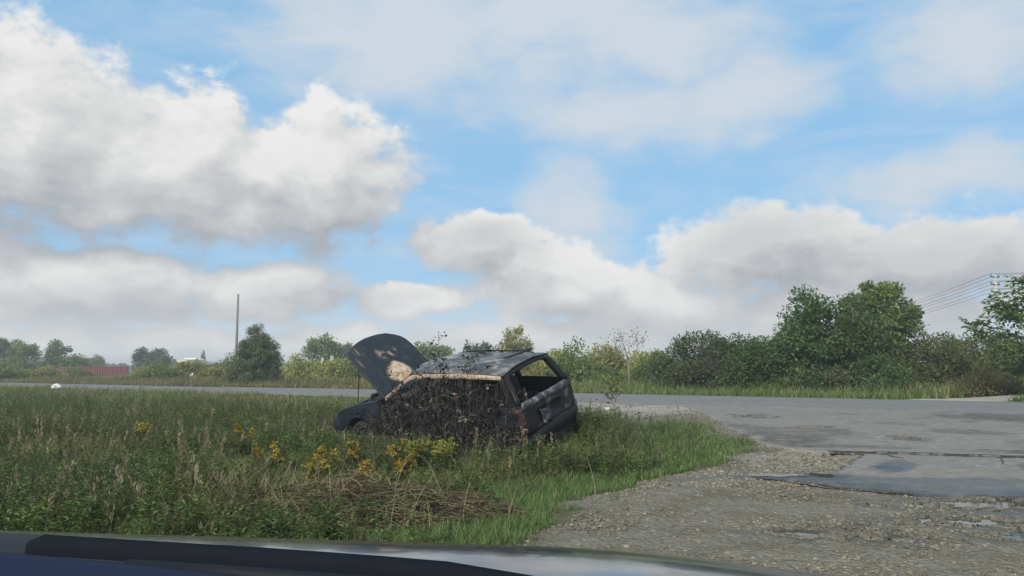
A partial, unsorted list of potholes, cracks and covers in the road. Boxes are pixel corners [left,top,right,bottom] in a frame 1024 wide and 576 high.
pothole [890,514,1024,529]
pothole [965,529,1024,542]
